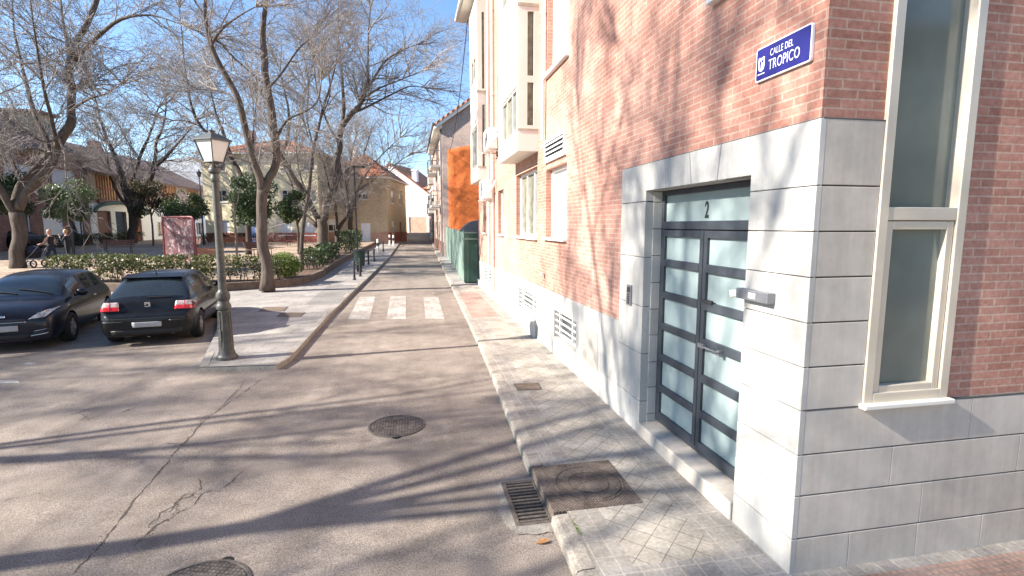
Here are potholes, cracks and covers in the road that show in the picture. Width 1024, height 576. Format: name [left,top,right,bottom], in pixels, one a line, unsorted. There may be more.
drain grate [497,475,554,534]
utility cover [532,460,643,518]
utility cover [514,383,542,391]
manhole cover [368,415,425,439]
manhole cover [165,556,251,576]
crack [73,379,260,574]
